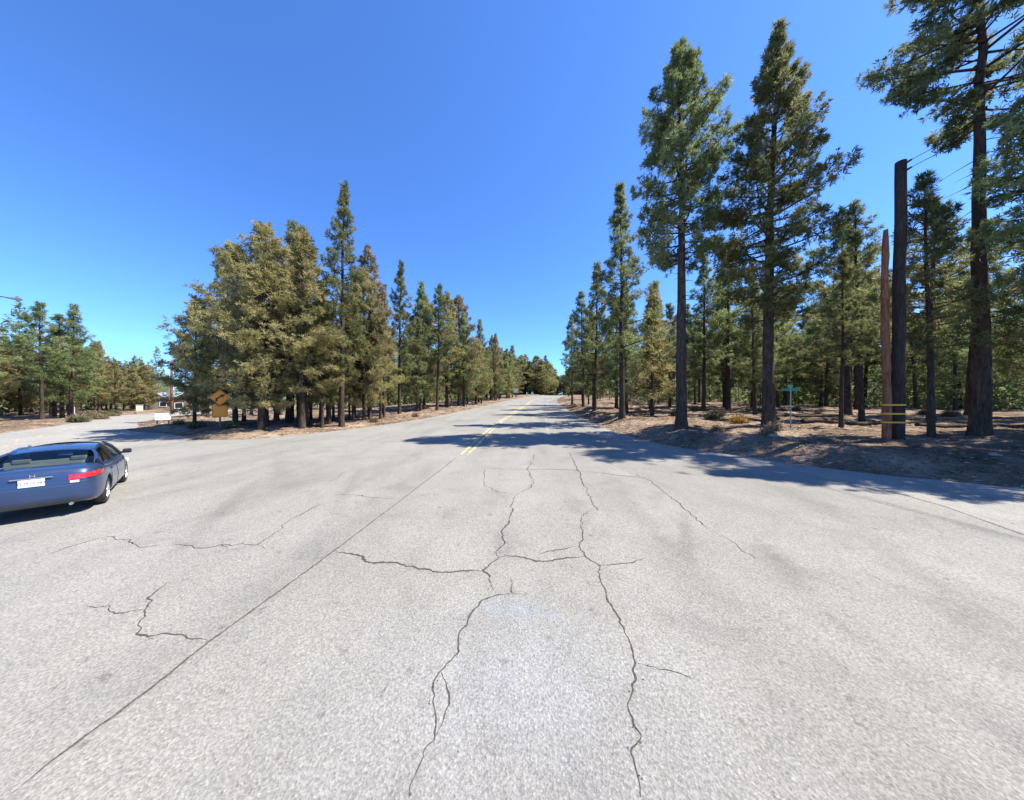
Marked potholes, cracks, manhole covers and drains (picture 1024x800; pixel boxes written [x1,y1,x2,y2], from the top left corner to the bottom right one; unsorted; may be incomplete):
crack [90,580,206,640]
crack [50,536,157,554]
crack [339,452,756,797]
crack [176,506,316,549]
